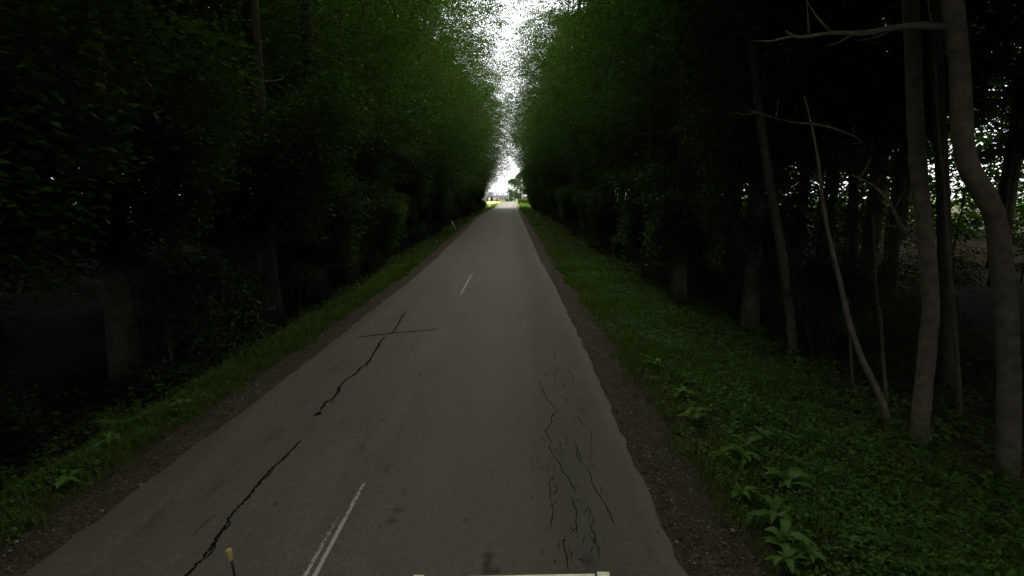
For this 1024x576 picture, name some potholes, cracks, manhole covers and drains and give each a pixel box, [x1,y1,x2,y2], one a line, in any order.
crack [530,350,658,571]
crack [320,312,435,411]
crack [184,440,301,576]
